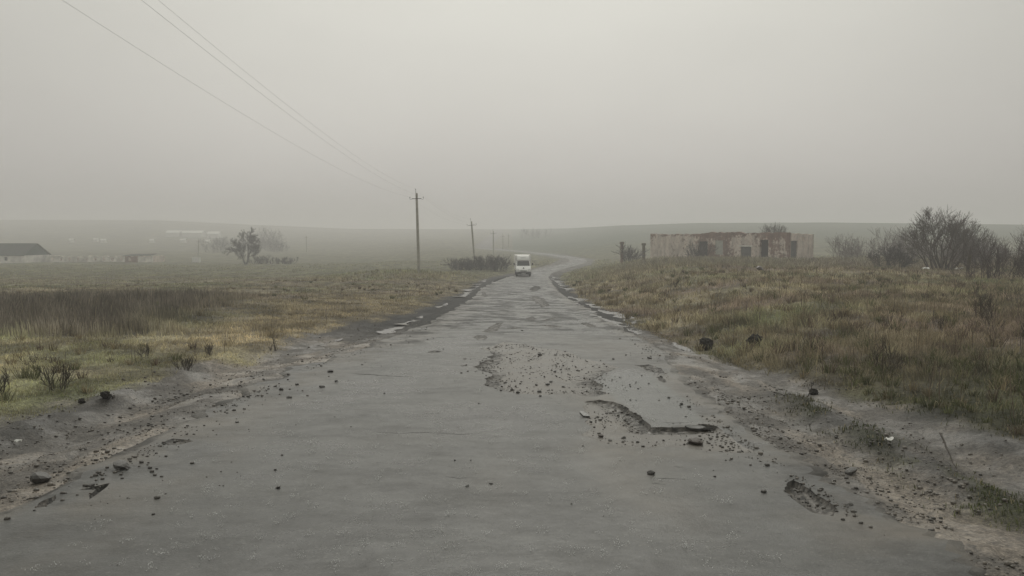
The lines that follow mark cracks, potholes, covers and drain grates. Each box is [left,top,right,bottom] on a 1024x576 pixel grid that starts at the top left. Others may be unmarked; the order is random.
pothole [474,342,619,397]
pothole [785,480,837,516]
pothole [581,400,754,453]
